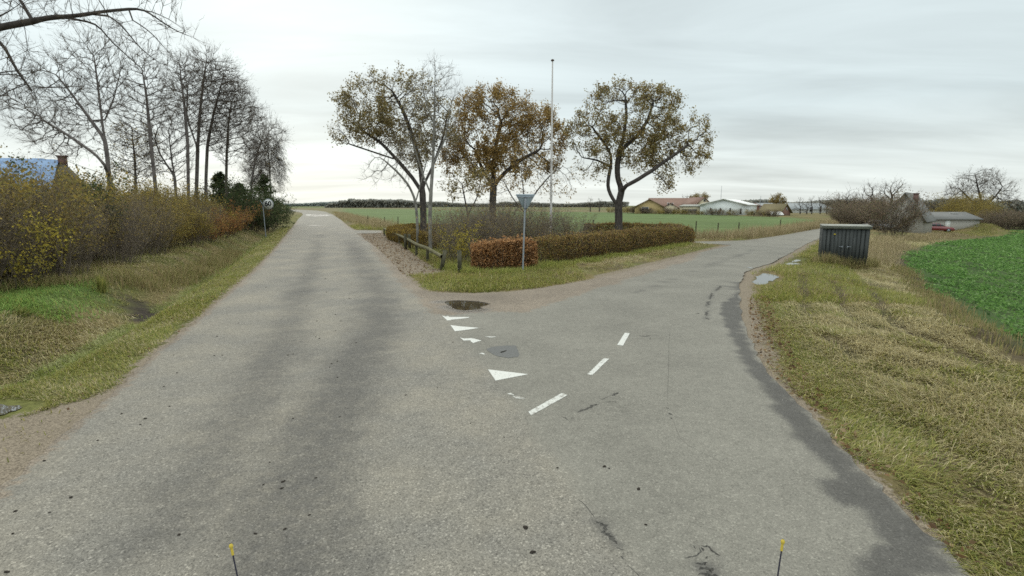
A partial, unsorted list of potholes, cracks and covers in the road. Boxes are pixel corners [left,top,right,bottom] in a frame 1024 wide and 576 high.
crack [686,545,720,576]
crack [563,392,619,420]
pothole [445,300,489,310]
crack [697,286,727,320]
crack [578,499,639,576]
